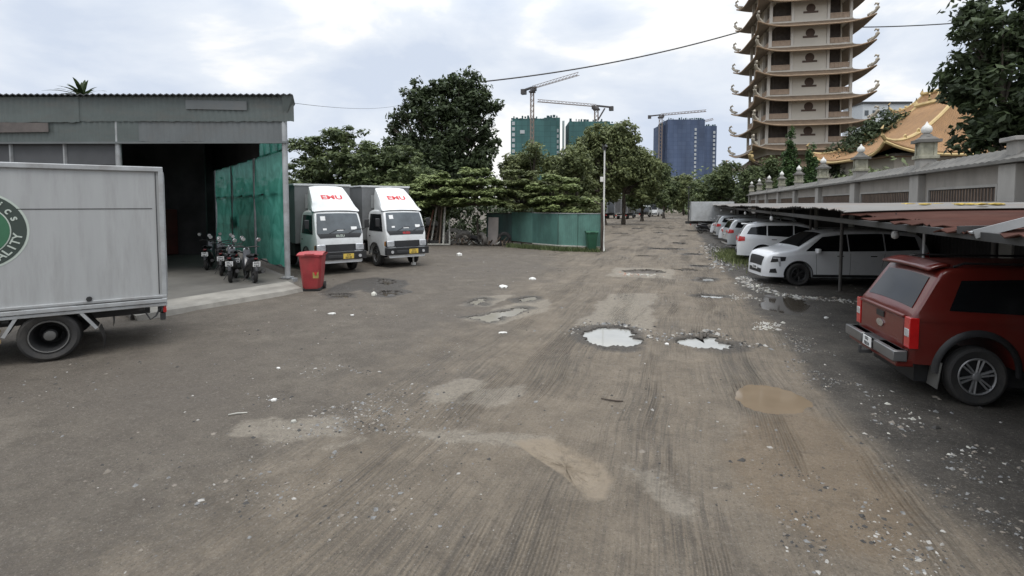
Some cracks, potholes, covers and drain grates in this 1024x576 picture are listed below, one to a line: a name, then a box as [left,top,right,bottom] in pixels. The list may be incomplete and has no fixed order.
pothole [573,324,654,350]
pothole [460,297,494,306]
pothole [665,333,745,352]
pothole [374,289,409,298]
pothole [462,306,537,325]
pothole [372,278,404,286]
pothole [715,378,837,422]
